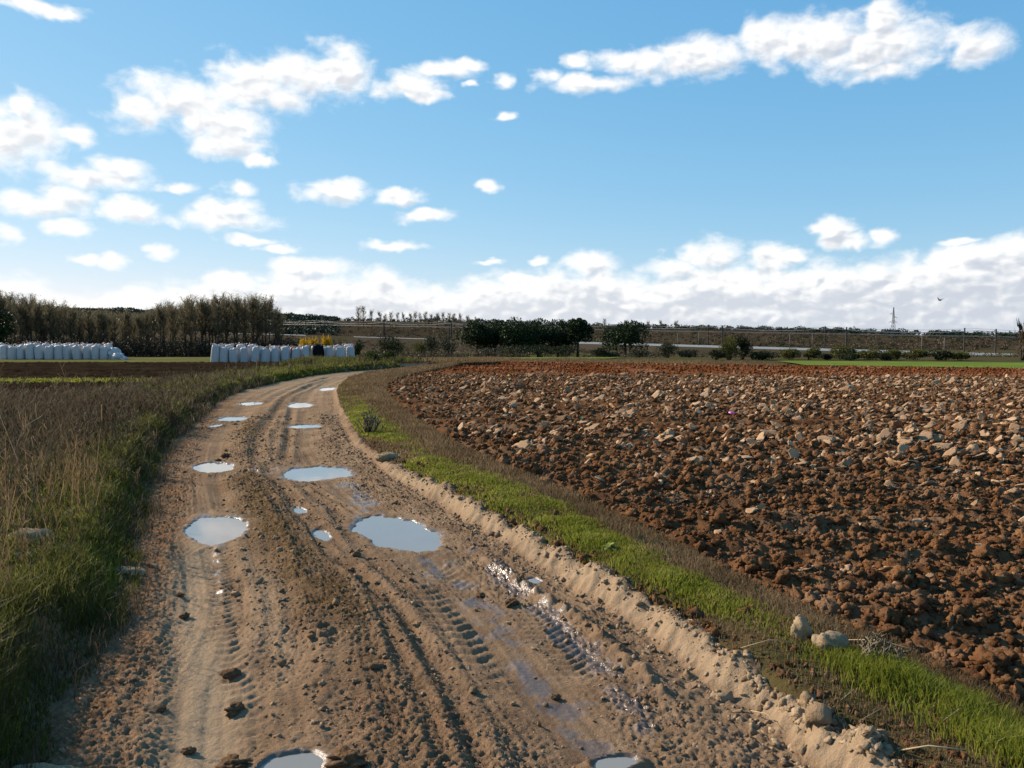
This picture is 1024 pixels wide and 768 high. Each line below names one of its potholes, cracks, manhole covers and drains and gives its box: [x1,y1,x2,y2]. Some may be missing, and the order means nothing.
pothole [182,513,253,548]
pothole [273,465,360,482]
pothole [346,512,450,555]
pothole [254,746,331,768]
pothole [189,461,236,474]
